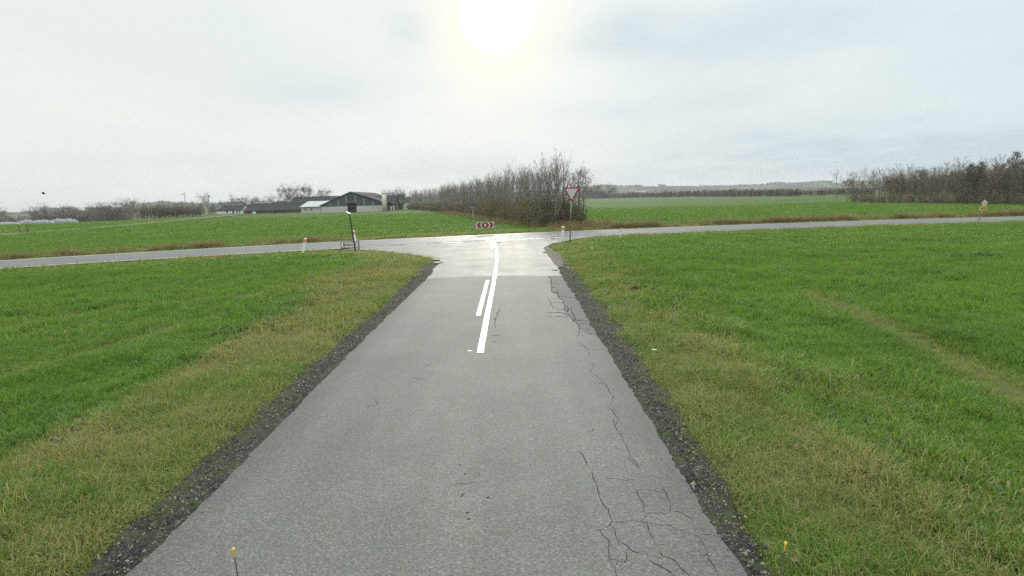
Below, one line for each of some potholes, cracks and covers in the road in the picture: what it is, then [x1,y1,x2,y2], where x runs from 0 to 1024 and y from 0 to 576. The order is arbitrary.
crack [577,450,719,576]
crack [543,276,638,466]
